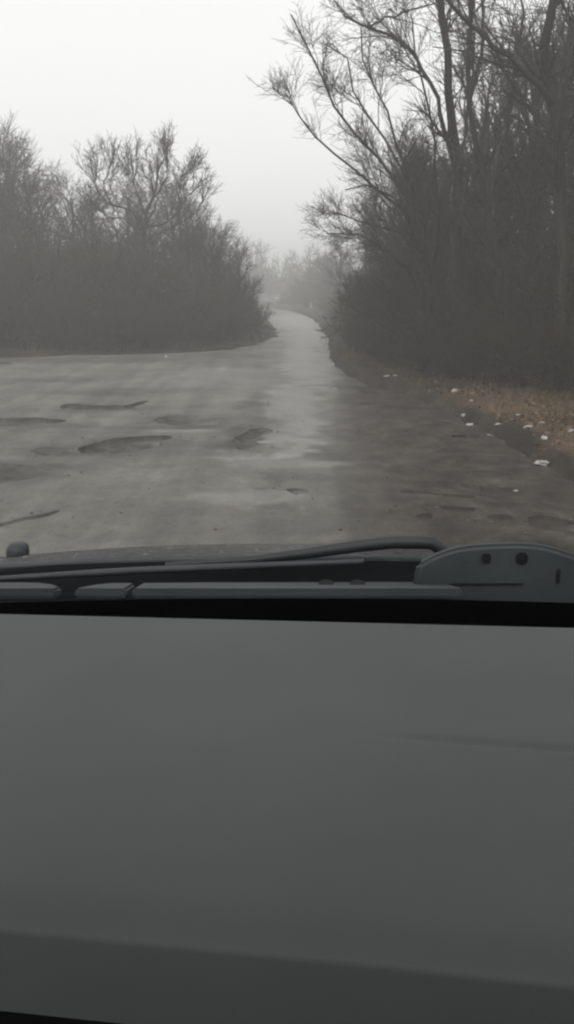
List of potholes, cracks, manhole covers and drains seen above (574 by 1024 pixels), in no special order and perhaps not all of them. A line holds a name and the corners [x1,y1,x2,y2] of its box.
crack [0,510,60,527]
pothole [0,418,67,426]
pothole [152,417,197,426]
pothole [78,435,173,454]
pothole [232,428,273,450]
pothole [31,447,79,456]
pothole [527,515,574,528]
pothole [60,401,149,410]
